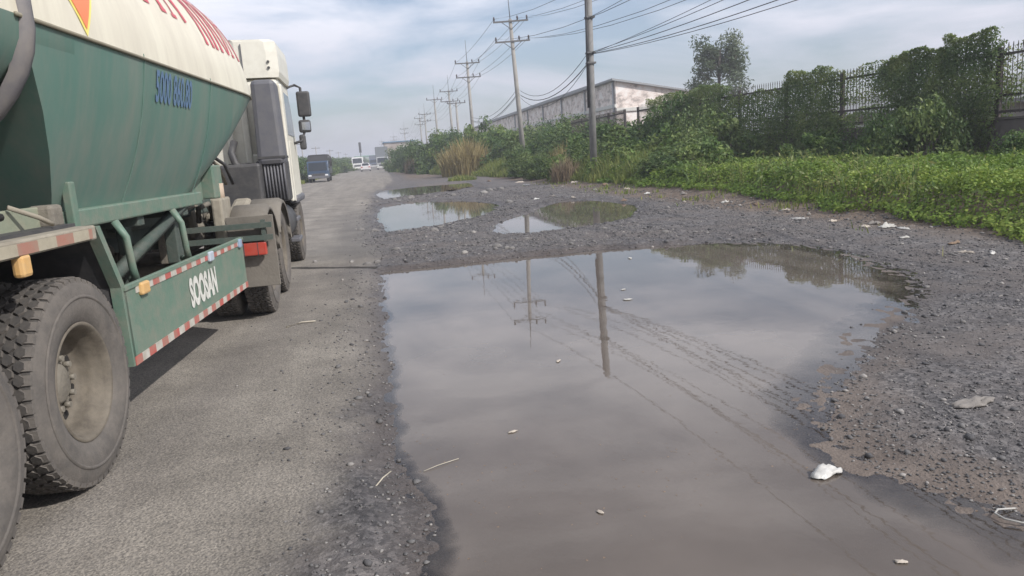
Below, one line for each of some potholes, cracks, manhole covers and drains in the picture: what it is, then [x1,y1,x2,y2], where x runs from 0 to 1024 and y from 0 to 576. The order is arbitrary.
pothole [367,198,507,232]
pothole [337,230,1024,576]
pothole [480,197,649,234]
pothole [370,182,478,199]
